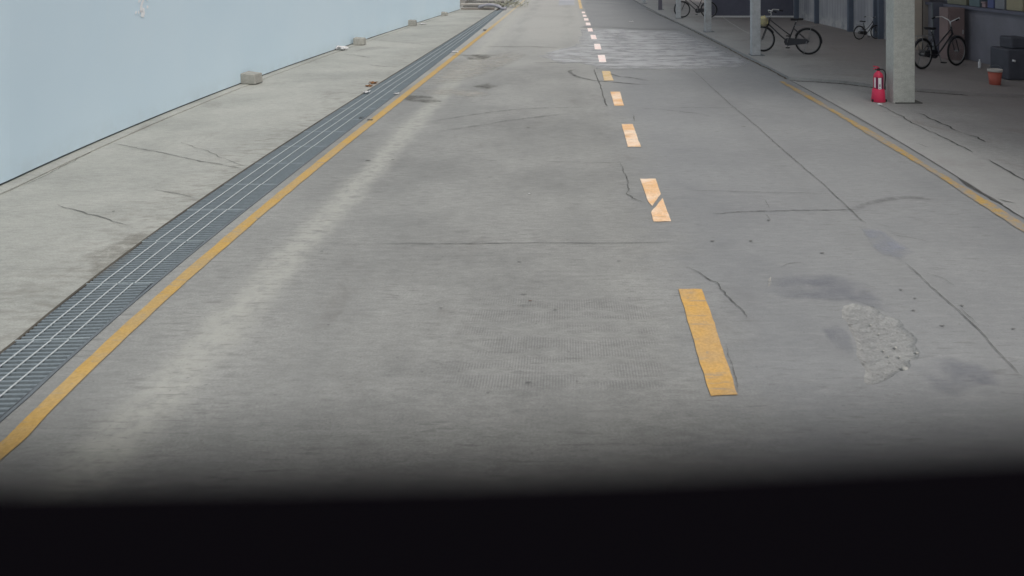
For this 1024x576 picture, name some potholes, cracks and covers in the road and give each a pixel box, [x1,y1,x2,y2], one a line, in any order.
drain grate [255,146,326,164]
drain grate [340,99,387,109]
drain grate [15,283,151,342]
drain grate [0,339,87,418]
drain grate [281,132,345,147]
drain grate [224,163,303,185]
drain grate [86,241,203,285]
drain grate [304,119,361,132]
drain grate [187,184,275,210]
crack [912,268,1017,371]
drain grate [142,209,243,243]
drain grate [323,108,375,120]
